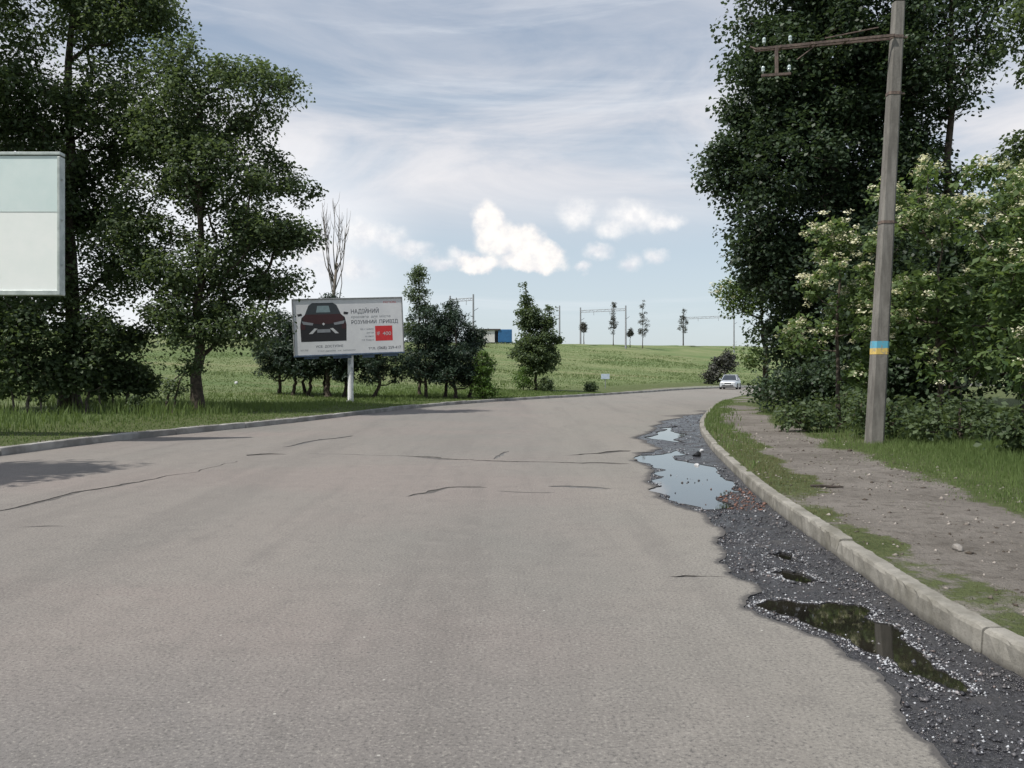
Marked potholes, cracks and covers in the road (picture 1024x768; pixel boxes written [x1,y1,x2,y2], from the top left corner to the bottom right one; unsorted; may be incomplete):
crack [0,436,628,527]
pothole [634,411,1024,768]
